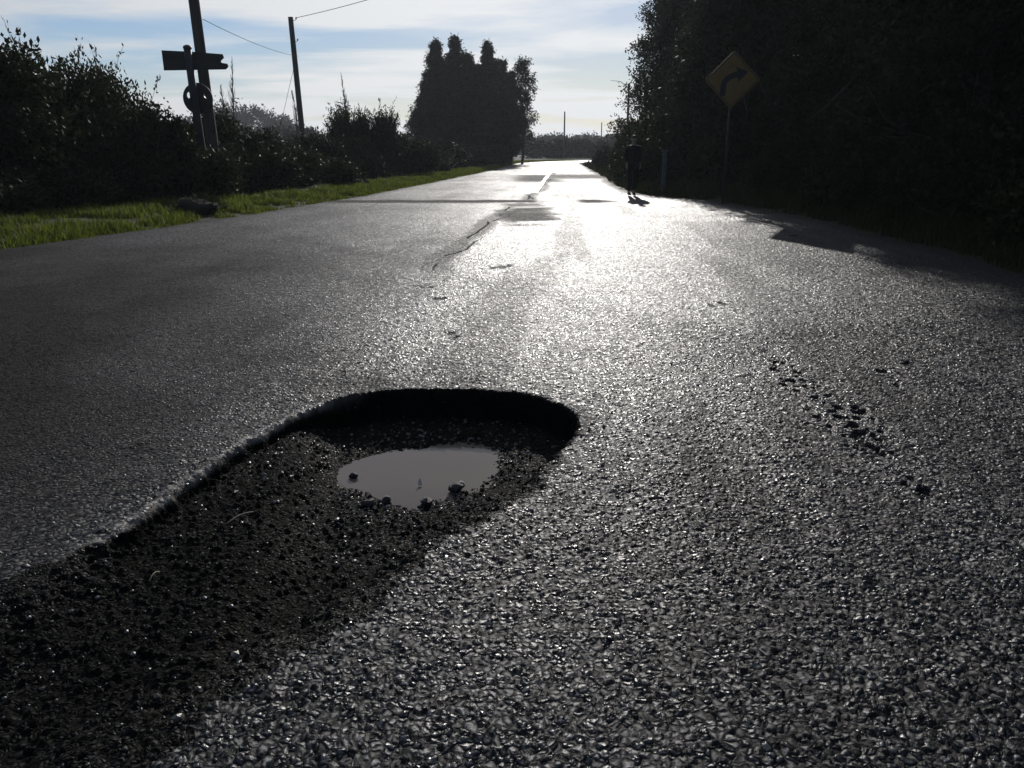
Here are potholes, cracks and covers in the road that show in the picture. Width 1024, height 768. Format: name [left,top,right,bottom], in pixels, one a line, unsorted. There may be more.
crack [404,172,555,289]
pothole [763,360,900,462]
pothole [0,388,581,768]
pothole [899,475,940,498]
